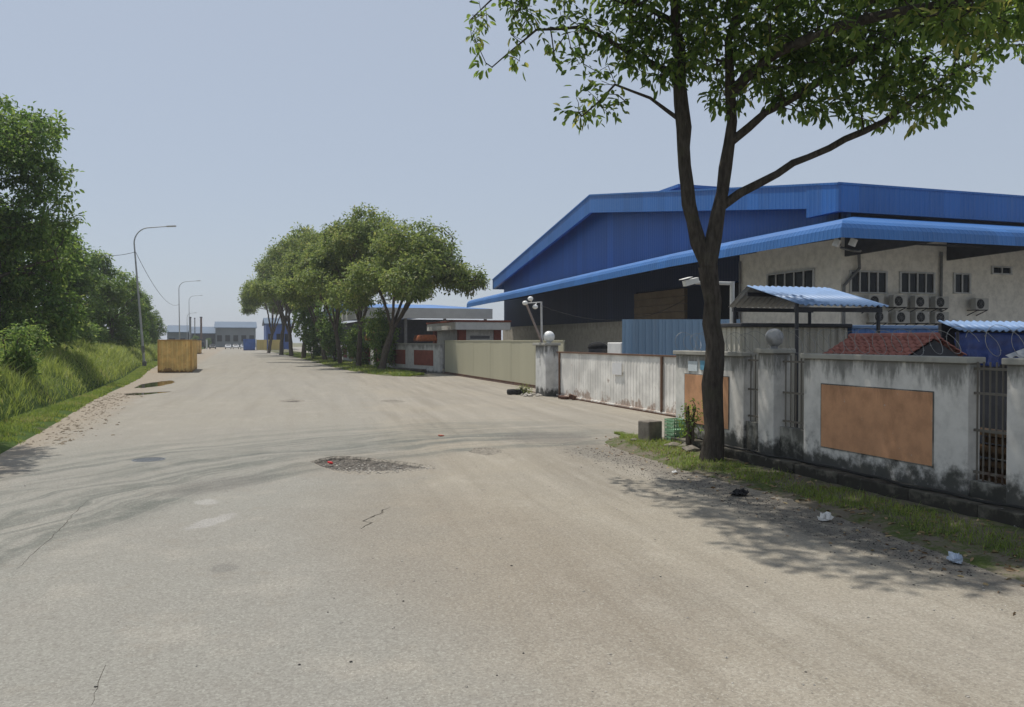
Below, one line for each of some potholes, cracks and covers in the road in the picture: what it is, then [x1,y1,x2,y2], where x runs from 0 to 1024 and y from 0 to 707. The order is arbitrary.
pothole [311,456,437,475]
